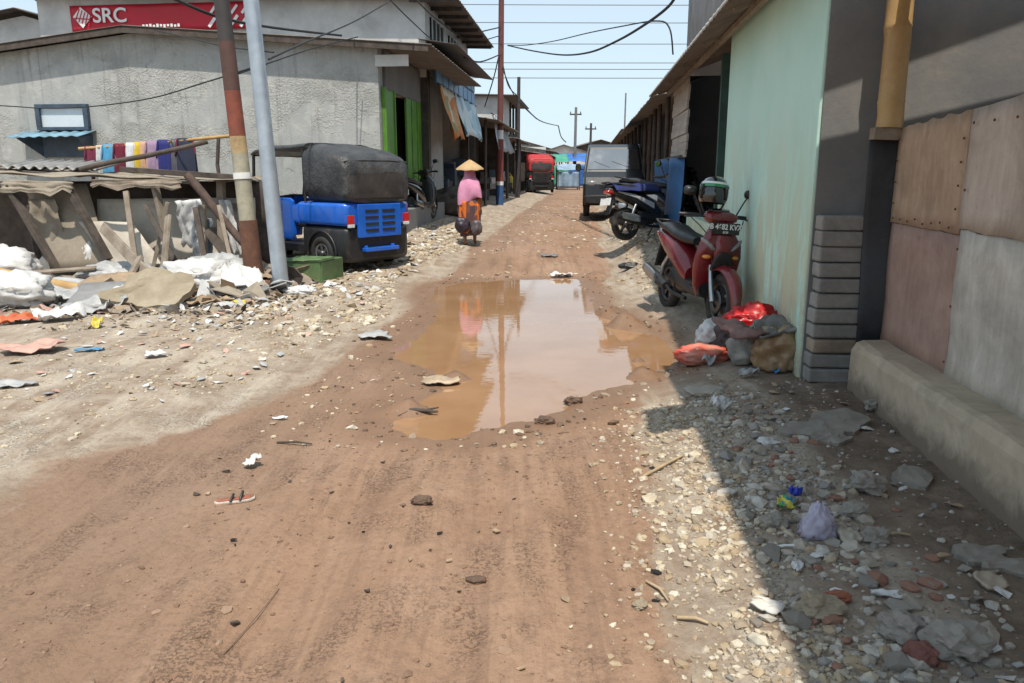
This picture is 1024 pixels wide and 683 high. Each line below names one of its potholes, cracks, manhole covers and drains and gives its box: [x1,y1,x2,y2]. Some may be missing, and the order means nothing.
pothole [357,275,703,450]
